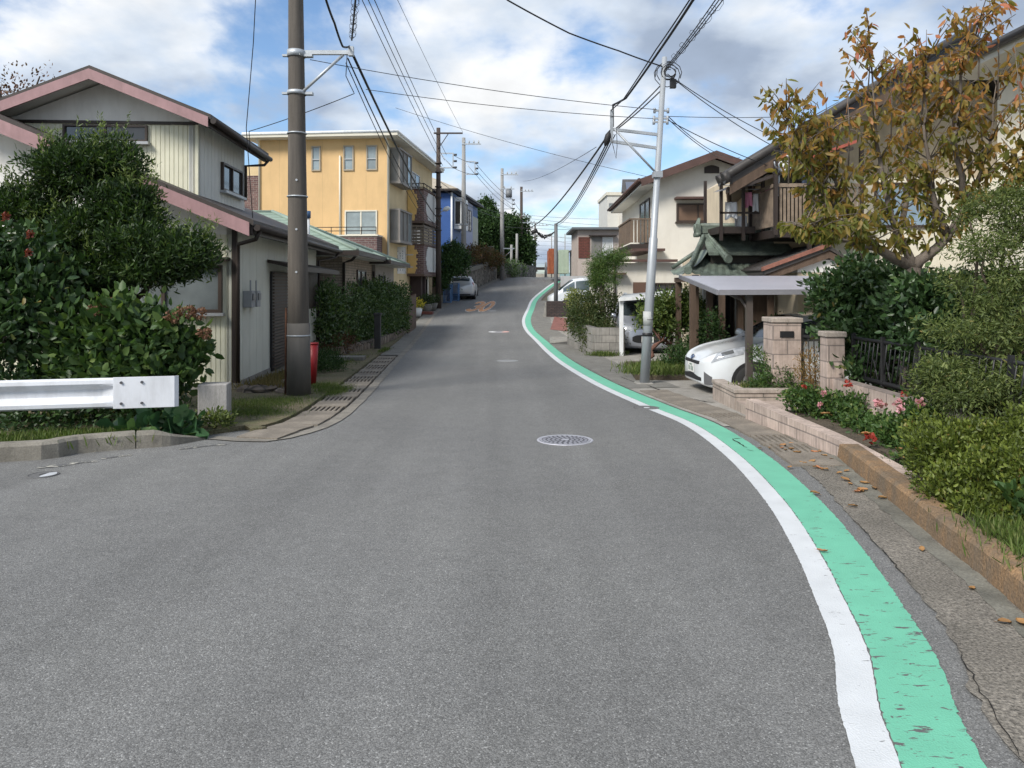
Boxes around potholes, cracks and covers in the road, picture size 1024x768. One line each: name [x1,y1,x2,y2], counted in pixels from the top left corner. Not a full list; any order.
manhole cover [537,435,593,446]
